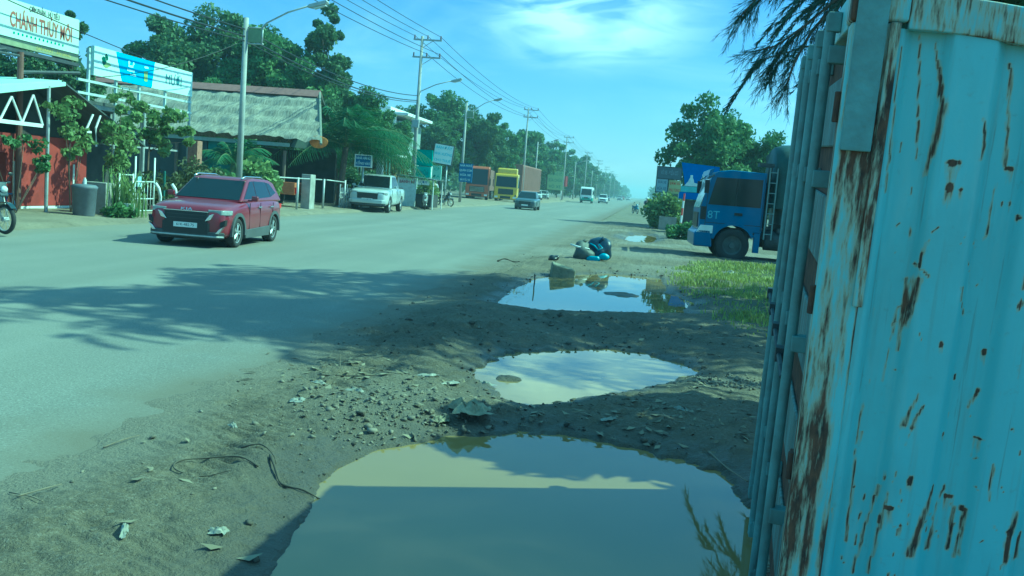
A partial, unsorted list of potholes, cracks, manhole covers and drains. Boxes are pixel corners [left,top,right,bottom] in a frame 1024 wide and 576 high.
pothole [458,342,710,409]
pothole [623,231,662,243]
pothole [489,269,702,313]
pothole [241,421,753,576]
